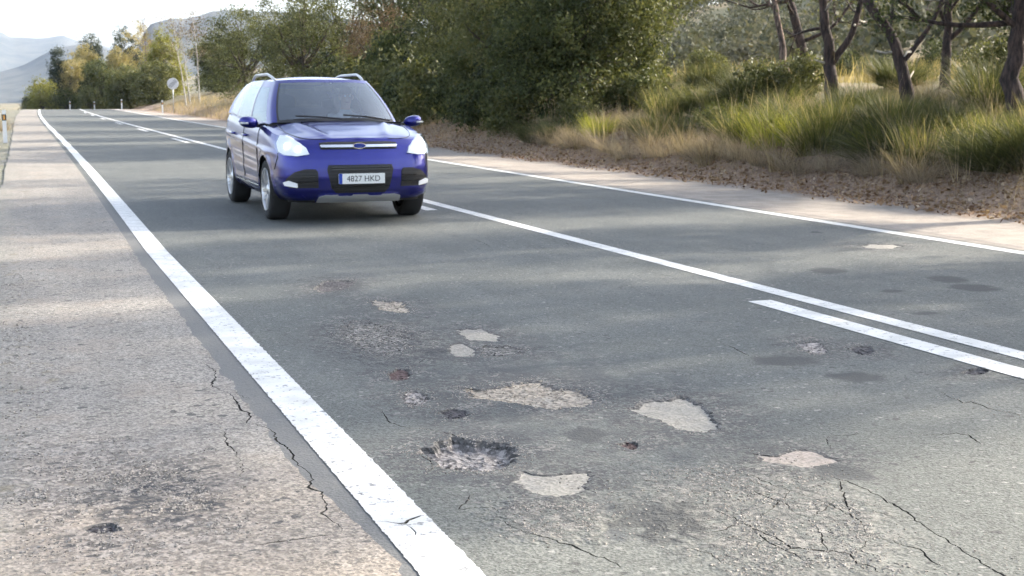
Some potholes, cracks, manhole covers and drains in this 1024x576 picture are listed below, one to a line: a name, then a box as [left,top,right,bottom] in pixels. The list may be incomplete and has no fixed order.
crack [714,476,1006,576]
pothole [440,408,470,419]
crack [459,492,620,567]
crack [183,366,342,545]
pothole [415,436,521,471]
pothole [387,367,413,381]
pothole [847,346,875,355]
pothole [83,523,122,534]
